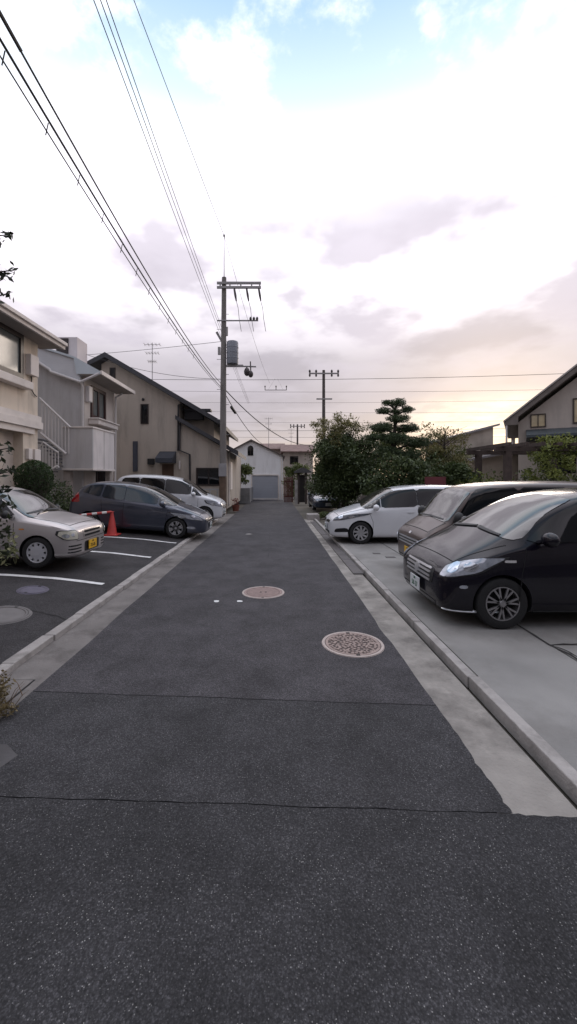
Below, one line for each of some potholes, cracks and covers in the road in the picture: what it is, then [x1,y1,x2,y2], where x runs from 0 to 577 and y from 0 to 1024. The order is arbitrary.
manhole cover [16,585,49,594]
manhole cover [0,606,32,625]
manhole cover [242,586,284,599]
manhole cover [322,631,385,658]
